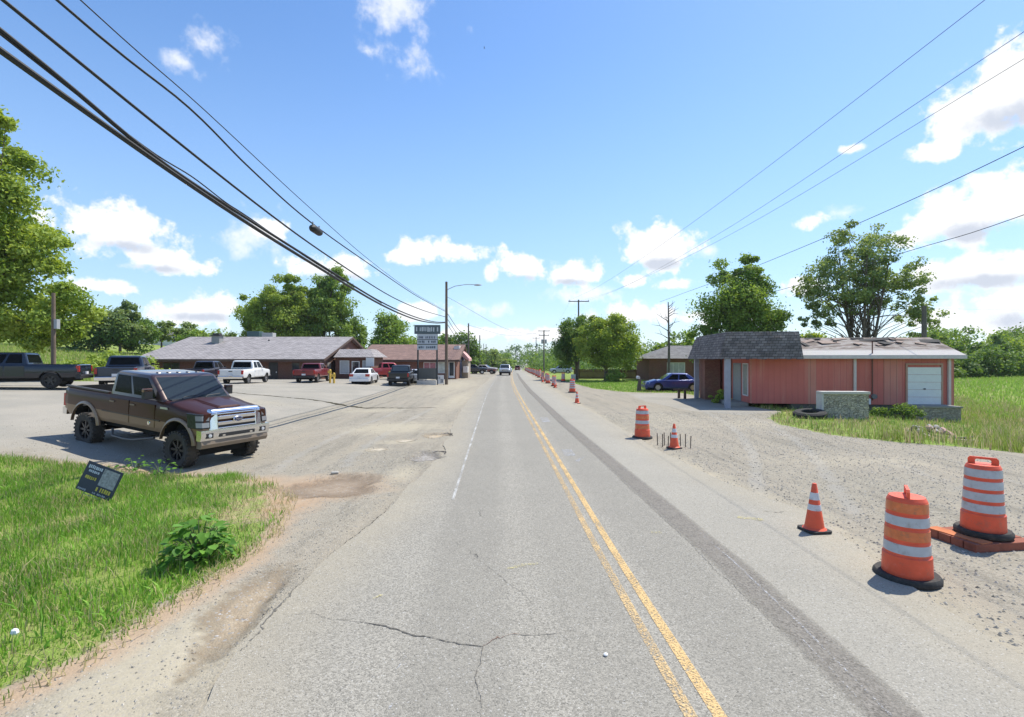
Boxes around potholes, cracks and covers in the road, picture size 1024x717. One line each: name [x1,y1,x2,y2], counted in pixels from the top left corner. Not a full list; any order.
pothole [411,452,439,462]
crack [241,576,566,717]
